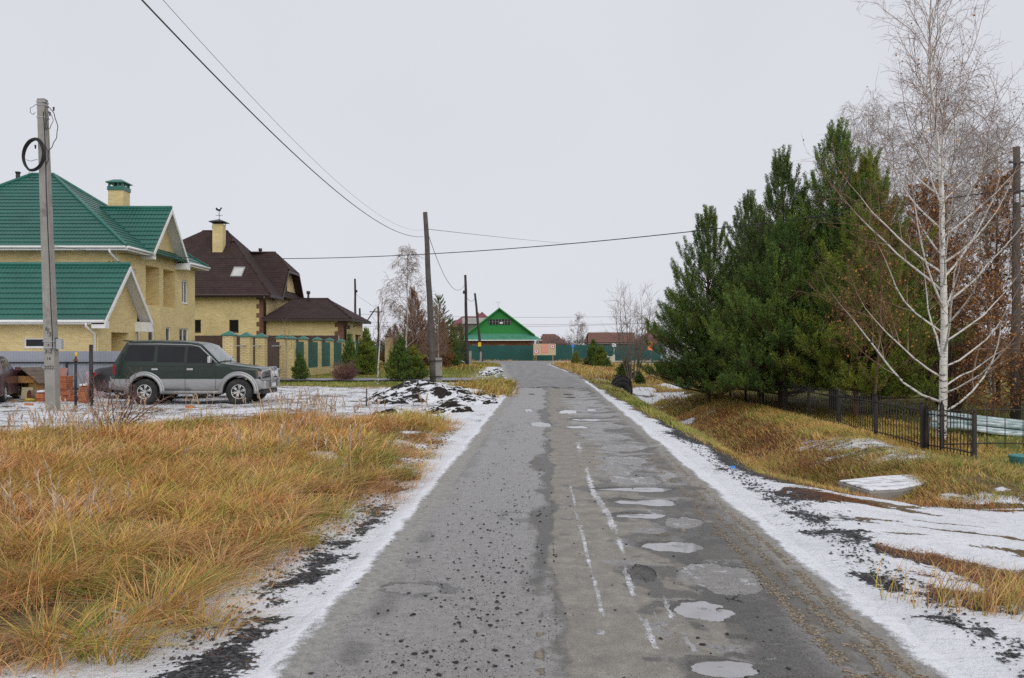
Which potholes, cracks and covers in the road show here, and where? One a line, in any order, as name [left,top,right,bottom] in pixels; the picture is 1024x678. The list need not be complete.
pothole [627,564,657,582]
